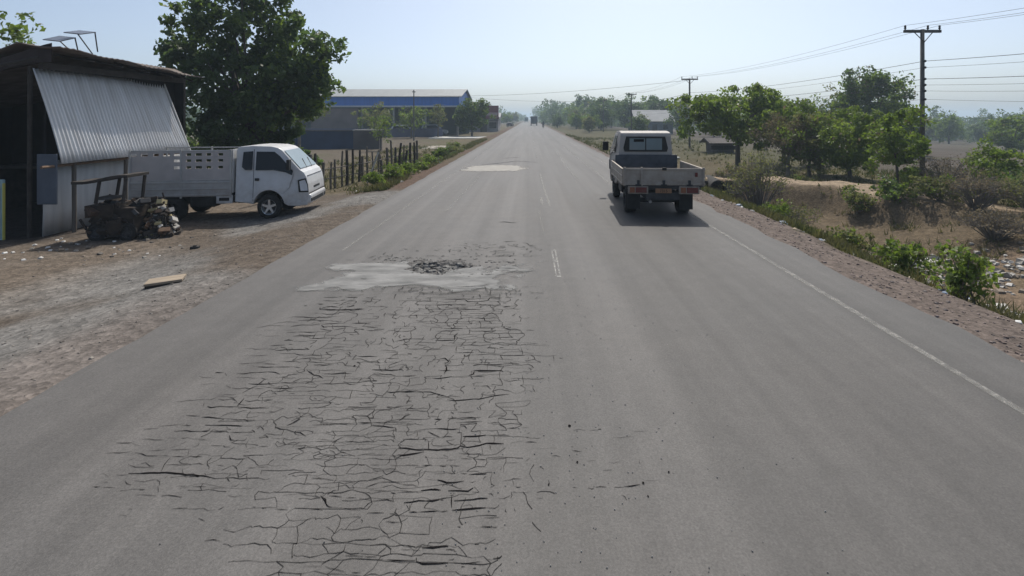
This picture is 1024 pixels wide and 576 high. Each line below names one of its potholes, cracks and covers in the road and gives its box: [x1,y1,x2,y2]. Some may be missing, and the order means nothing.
pothole [407,260,479,274]
crack [92,222,641,576]
